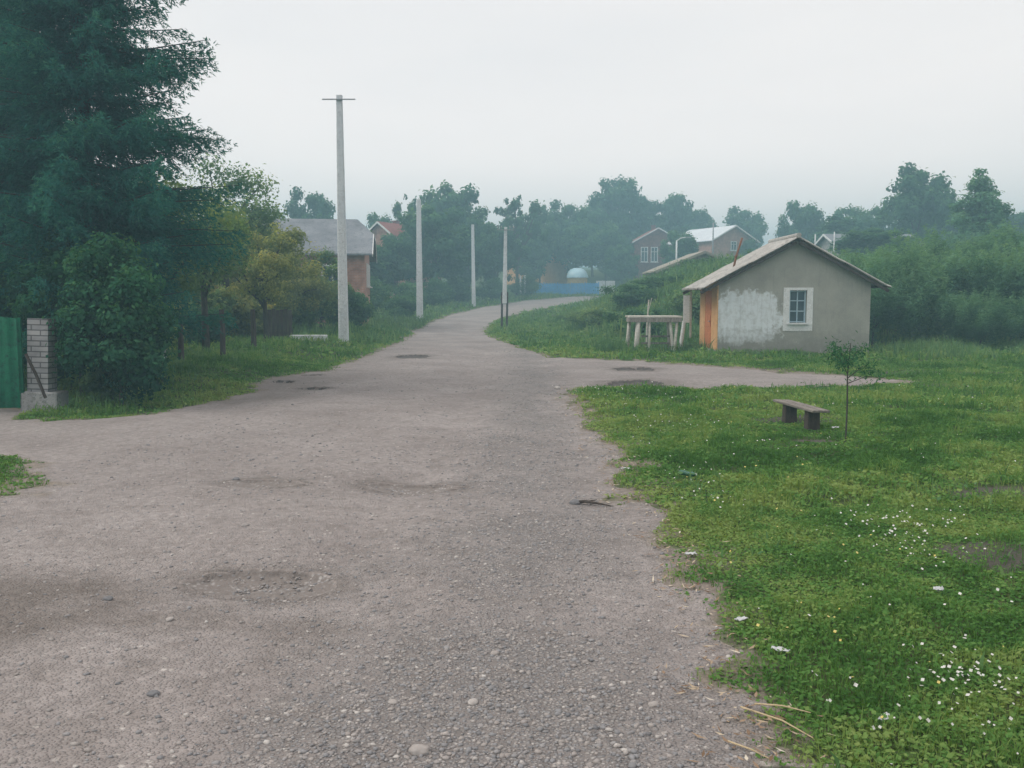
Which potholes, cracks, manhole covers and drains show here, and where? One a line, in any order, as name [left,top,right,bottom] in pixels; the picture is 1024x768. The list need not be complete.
pothole [220,478,312,489]
pothole [159,564,352,601]
pothole [361,481,469,496]
pothole [601,379,668,388]
